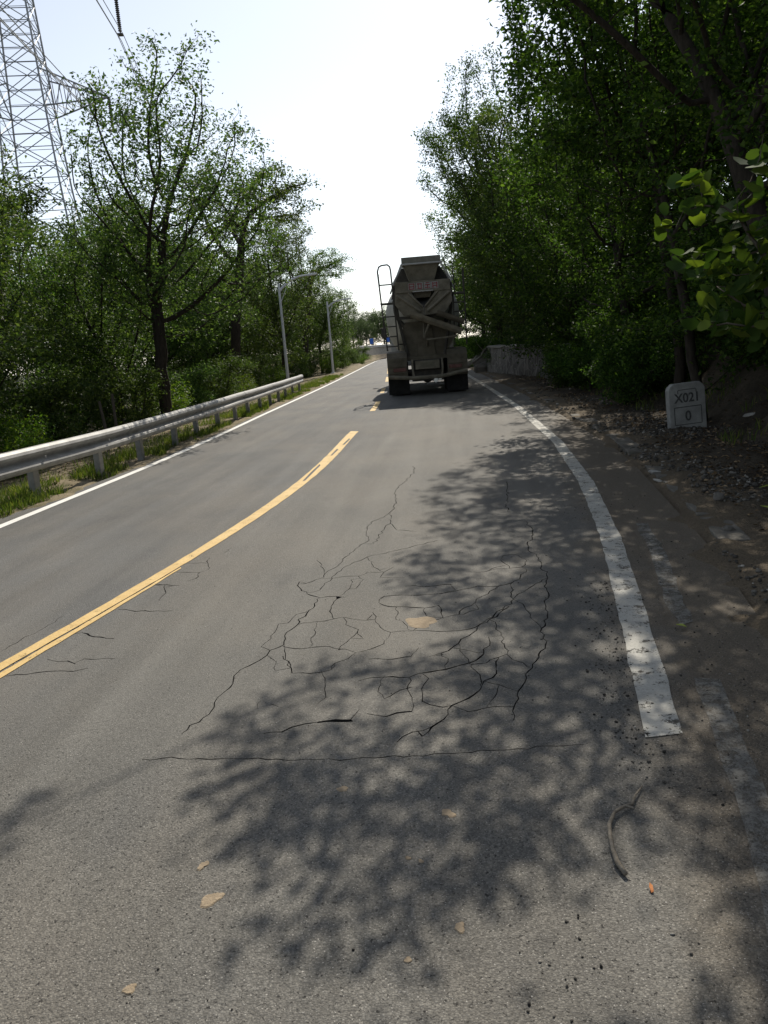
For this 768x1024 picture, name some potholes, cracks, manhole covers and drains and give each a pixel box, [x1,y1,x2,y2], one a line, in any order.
crack [144,744,584,761]
crack [183,469,550,742]
crack [0,560,210,676]
